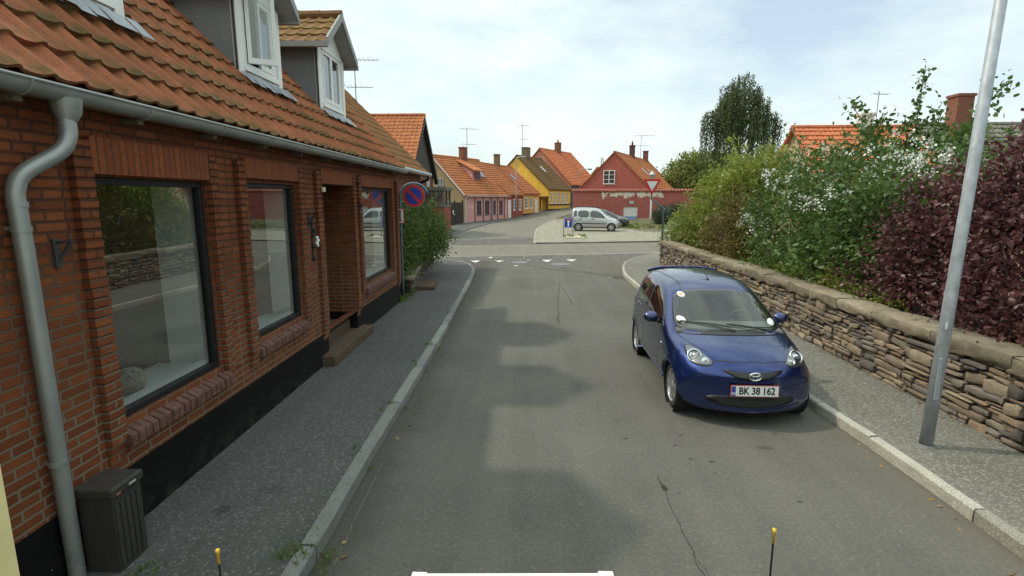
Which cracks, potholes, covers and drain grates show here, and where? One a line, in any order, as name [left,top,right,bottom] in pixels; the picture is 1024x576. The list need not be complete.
crack [508,278,574,324]
crack [658,476,710,576]
